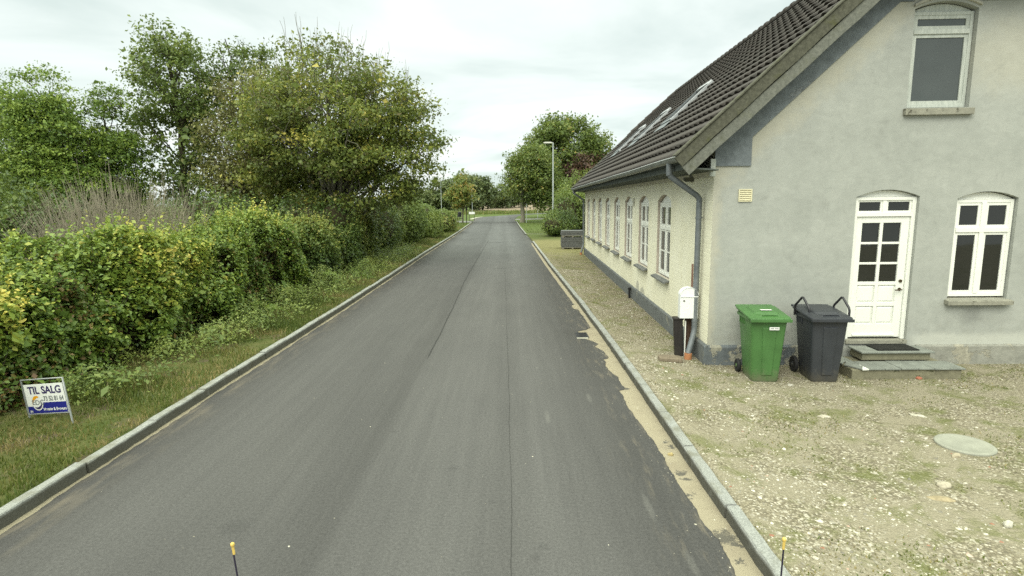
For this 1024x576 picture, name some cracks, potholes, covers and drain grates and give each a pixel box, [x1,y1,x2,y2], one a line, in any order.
manhole cover [933,434,998,457]
